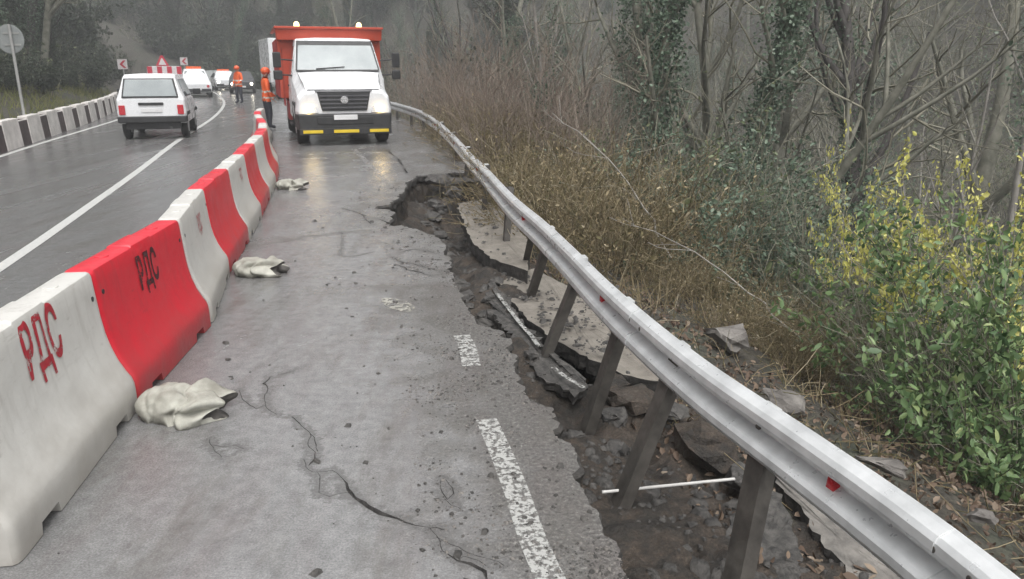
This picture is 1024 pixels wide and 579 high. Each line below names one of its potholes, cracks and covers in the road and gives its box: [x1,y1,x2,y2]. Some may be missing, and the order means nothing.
pothole [400,201,489,282]
crack [392,249,442,276]
crack [292,417,504,579]
crack [239,371,291,414]
